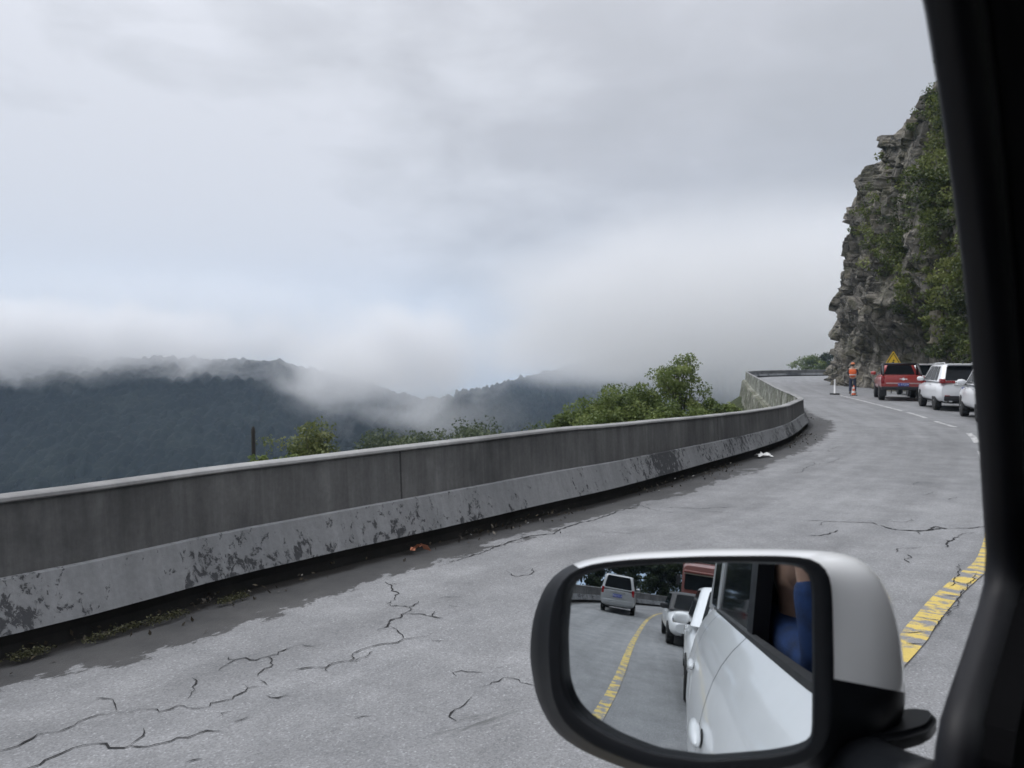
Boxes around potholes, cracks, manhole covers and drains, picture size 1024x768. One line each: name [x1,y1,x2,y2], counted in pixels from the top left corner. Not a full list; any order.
crack [285,583,458,672]
crack [448,667,532,720]
crack [3,644,315,768]
crack [808,519,984,644]
